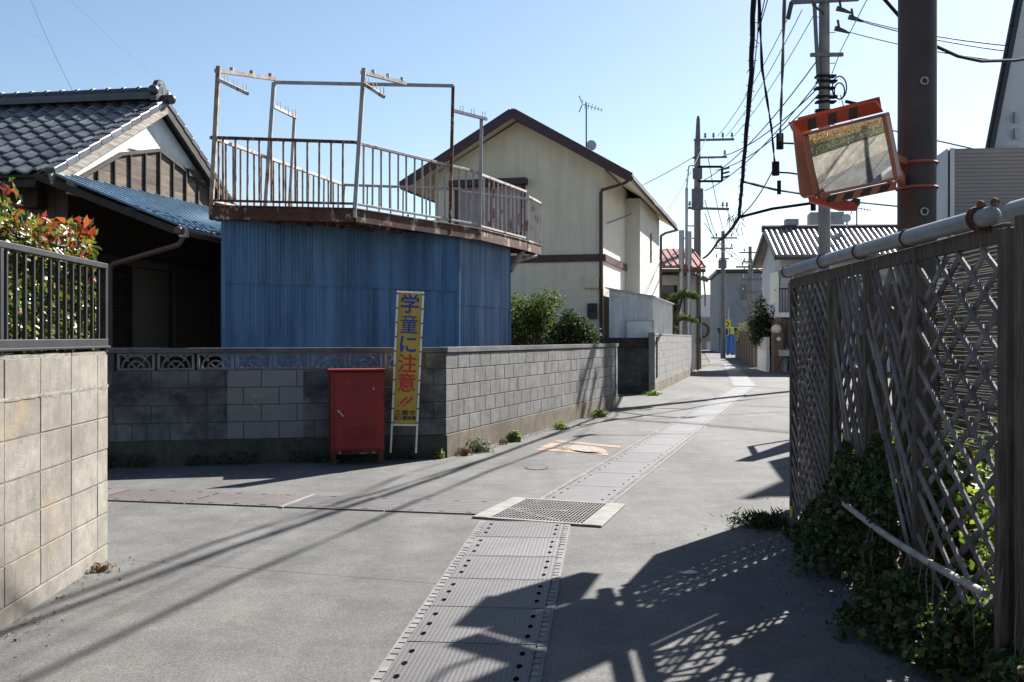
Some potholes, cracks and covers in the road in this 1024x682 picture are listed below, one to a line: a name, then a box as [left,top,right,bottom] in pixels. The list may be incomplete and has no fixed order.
drain grate [472,497,625,528]
